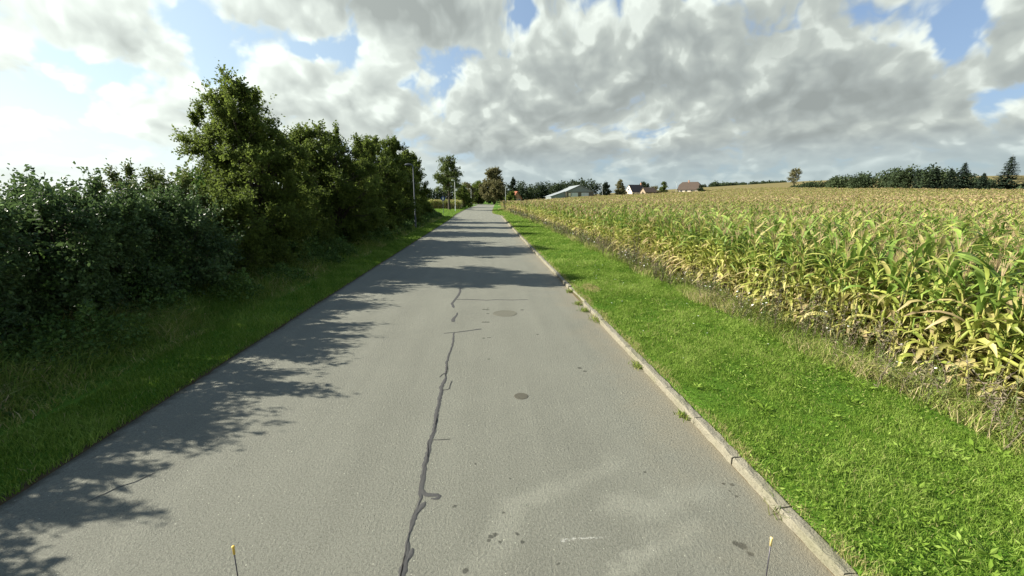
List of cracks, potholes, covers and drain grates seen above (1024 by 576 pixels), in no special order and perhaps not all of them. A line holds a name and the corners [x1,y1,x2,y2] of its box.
crack [87,472,155,502]
